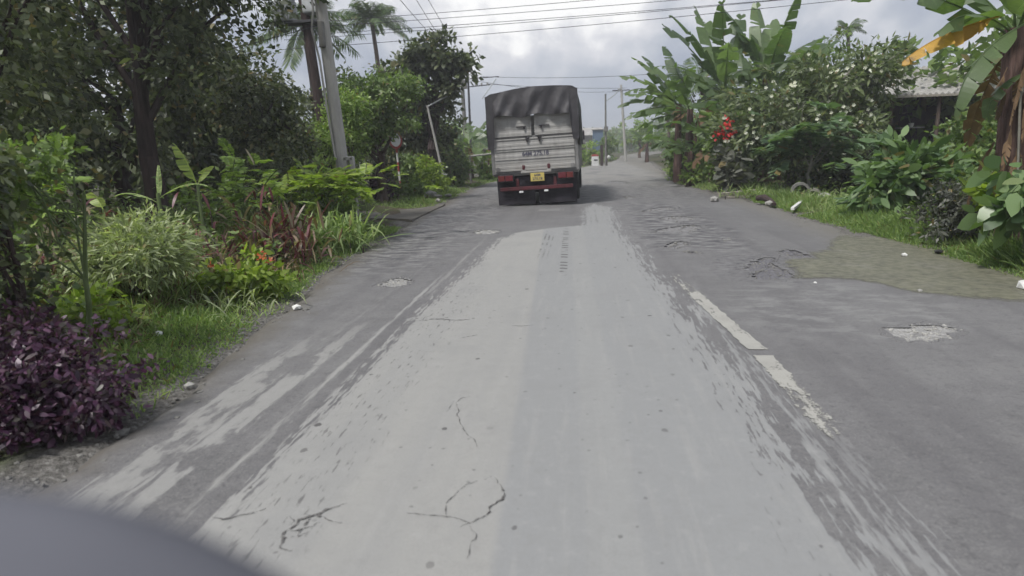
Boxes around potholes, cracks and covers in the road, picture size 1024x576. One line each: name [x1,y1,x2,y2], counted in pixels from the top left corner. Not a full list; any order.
crack [415,476,505,556]
pothole [371,276,415,289]
crack [280,503,345,551]
pothole [658,240,692,250]
pothole [874,321,969,344]
pothole [737,255,804,283]
pothole [646,224,708,234]
